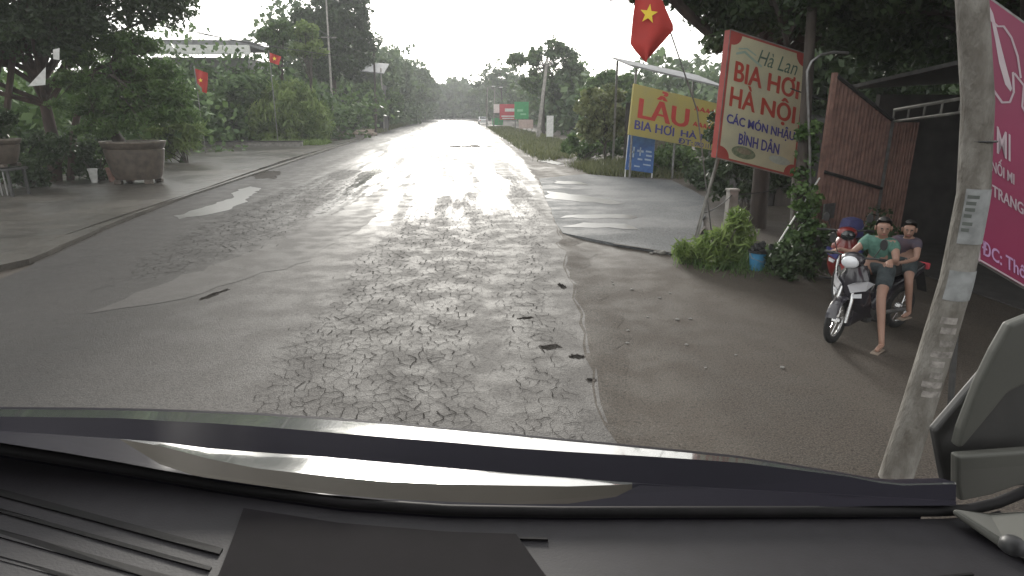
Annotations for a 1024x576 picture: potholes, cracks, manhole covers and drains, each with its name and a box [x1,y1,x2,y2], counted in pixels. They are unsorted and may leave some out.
crack [247,176,600,440]
